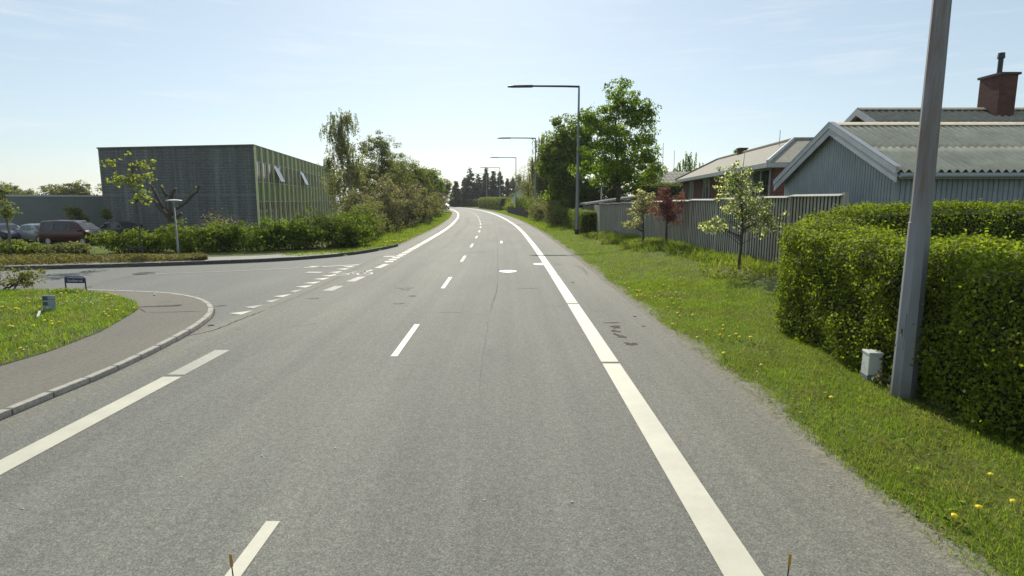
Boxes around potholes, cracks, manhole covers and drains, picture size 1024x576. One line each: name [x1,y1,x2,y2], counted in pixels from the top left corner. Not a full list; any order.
crack [479,269,498,389]
